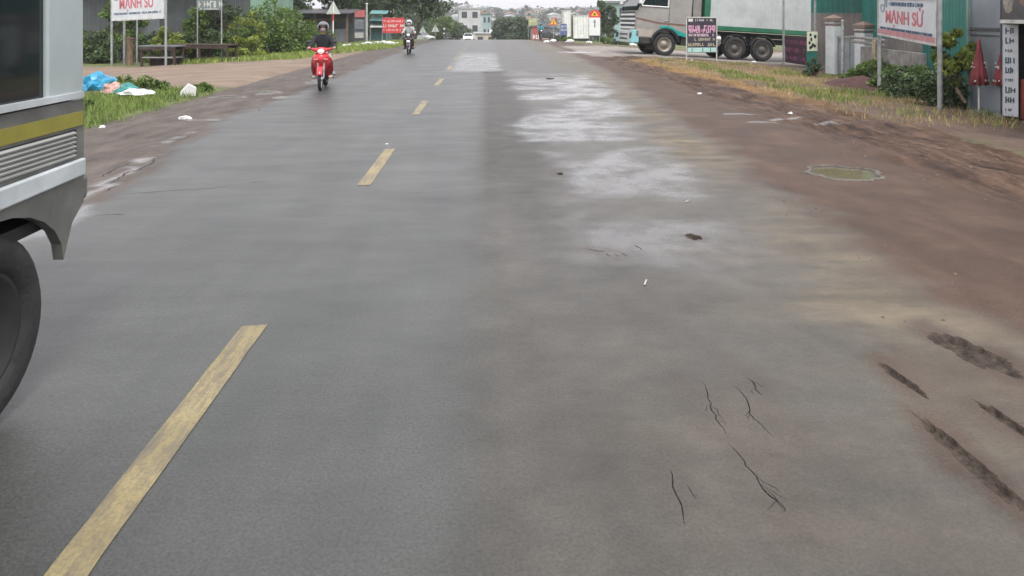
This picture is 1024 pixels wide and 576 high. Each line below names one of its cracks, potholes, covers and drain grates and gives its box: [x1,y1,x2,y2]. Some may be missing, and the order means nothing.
pothole [878,361,930,400]
pothole [972,399,1024,436]
pothole [926,332,1024,380]
crack [670,470,696,525]
crack [704,379,786,512]
pothole [909,410,1024,512]
crack [100,158,255,195]
